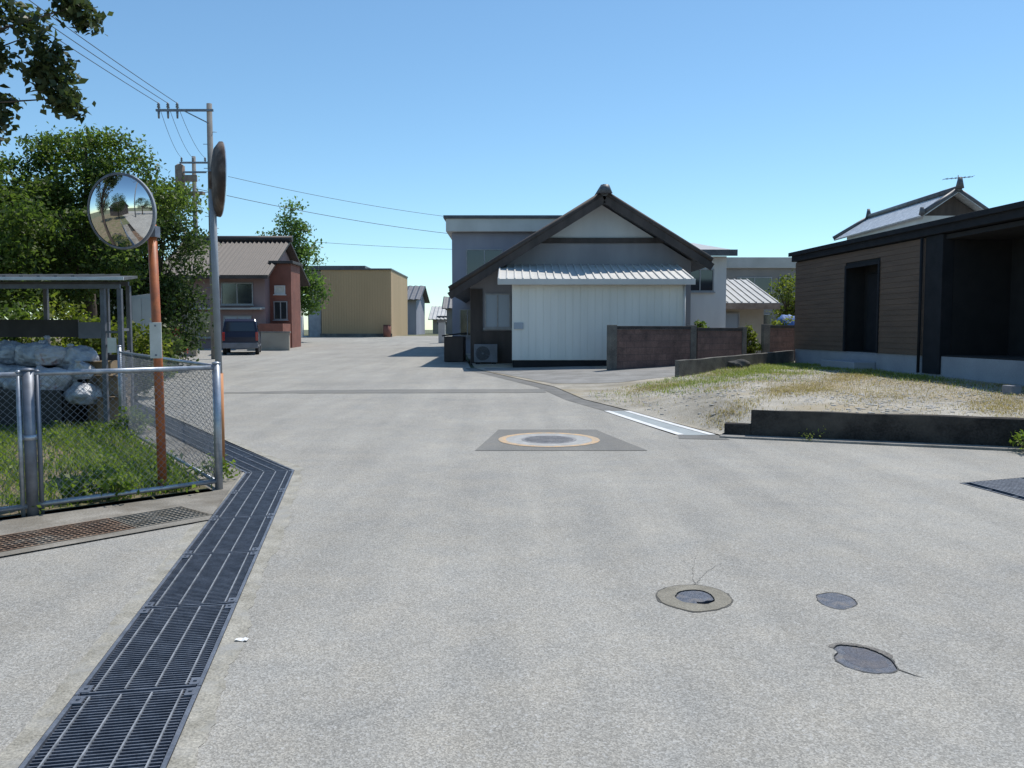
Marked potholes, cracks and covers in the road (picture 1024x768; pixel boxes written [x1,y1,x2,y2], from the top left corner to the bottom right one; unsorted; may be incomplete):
drain grate [225,455,293,472]
drain grate [211,490,286,518]
drain grate [182,516,275,555]
drain grate [962,478,1024,500]
drain grate [109,506,213,528]
drain grate [0,518,135,552]
manhole cover [656,584,734,612]
drain grate [19,686,201,768]
drain grate [75,603,237,696]
drain grate [180,435,233,448]
drain grate [231,470,294,492]
drain grate [200,445,258,459]
